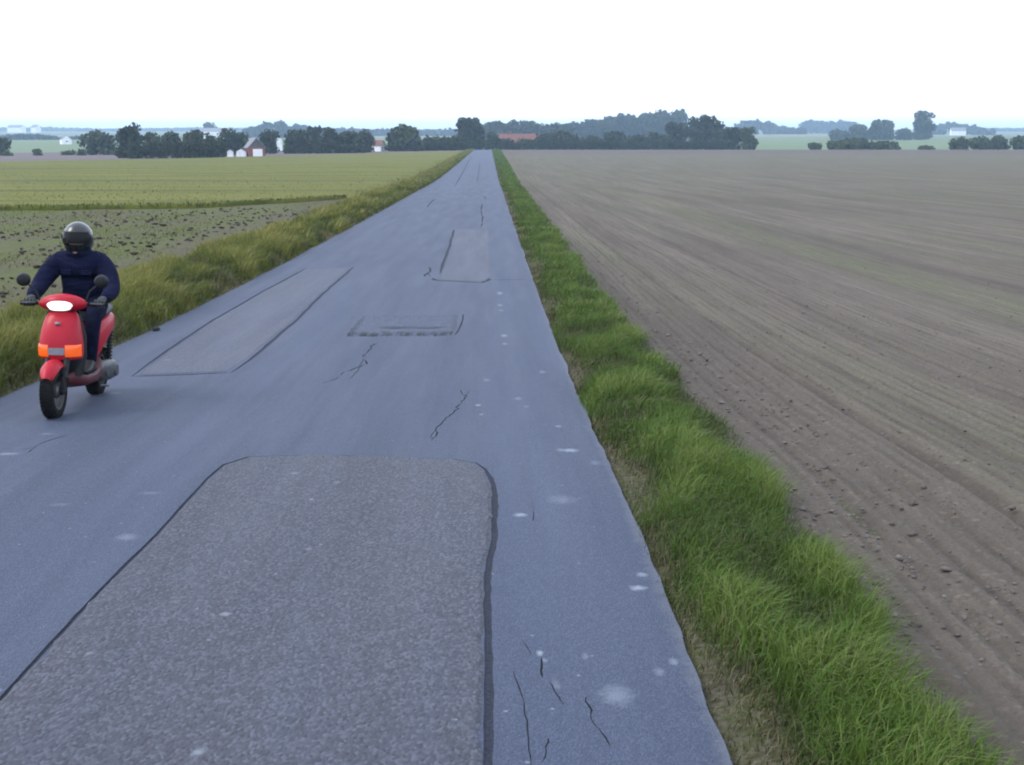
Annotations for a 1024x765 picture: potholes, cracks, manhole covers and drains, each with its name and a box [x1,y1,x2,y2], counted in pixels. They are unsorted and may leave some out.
crack [513,642,563,763]
crack [585,698,611,747]
crack [431,390,469,440]
crack [331,343,377,381]
